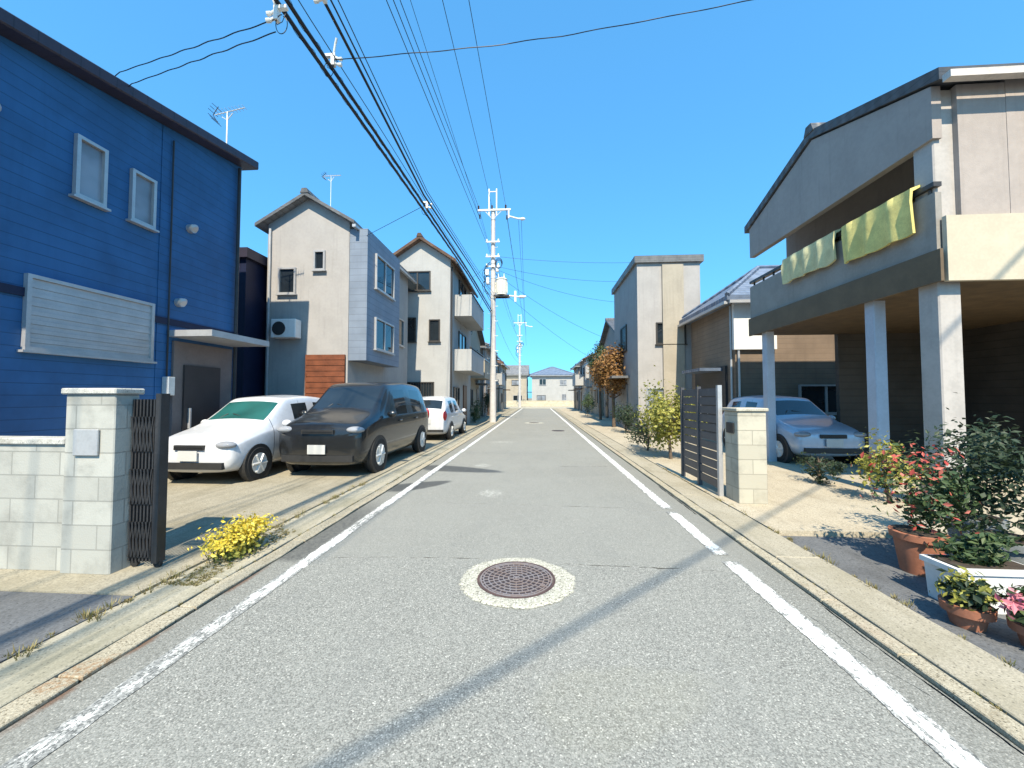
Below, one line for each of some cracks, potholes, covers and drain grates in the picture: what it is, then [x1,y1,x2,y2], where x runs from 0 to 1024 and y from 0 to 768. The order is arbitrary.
manhole cover [459,557,575,610]
